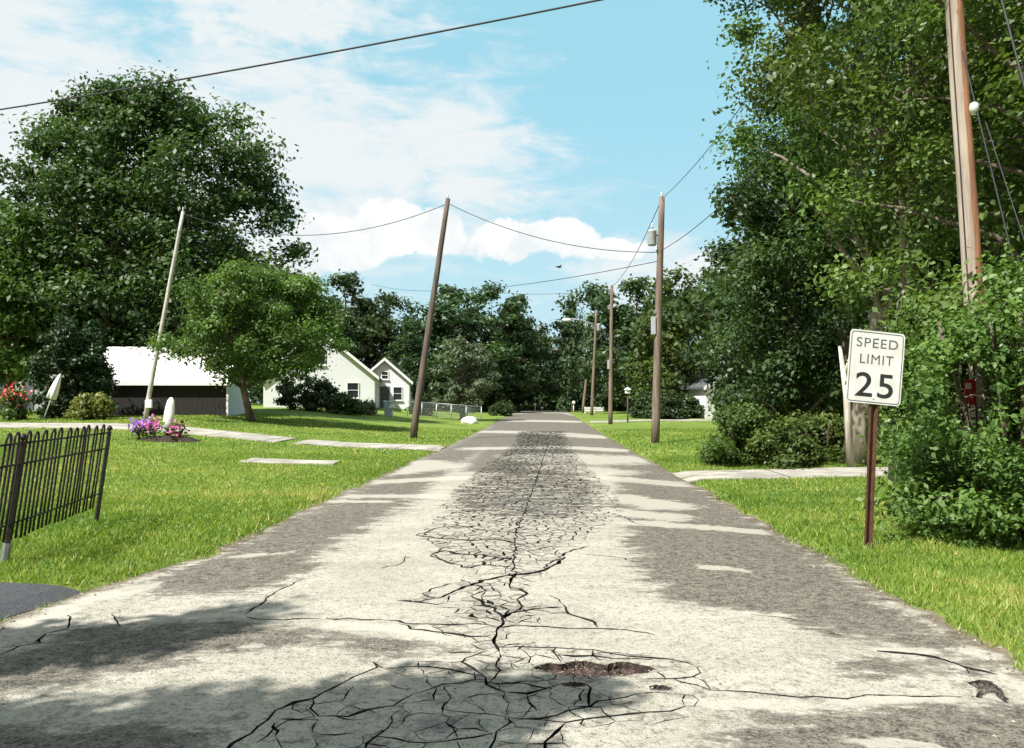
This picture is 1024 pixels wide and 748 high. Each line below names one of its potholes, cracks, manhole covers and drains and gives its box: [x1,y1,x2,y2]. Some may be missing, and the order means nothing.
pothole [966,680,1009,703]
pothole [534,661,656,677]
crack [226,431,997,748]
crack [3,615,84,653]
